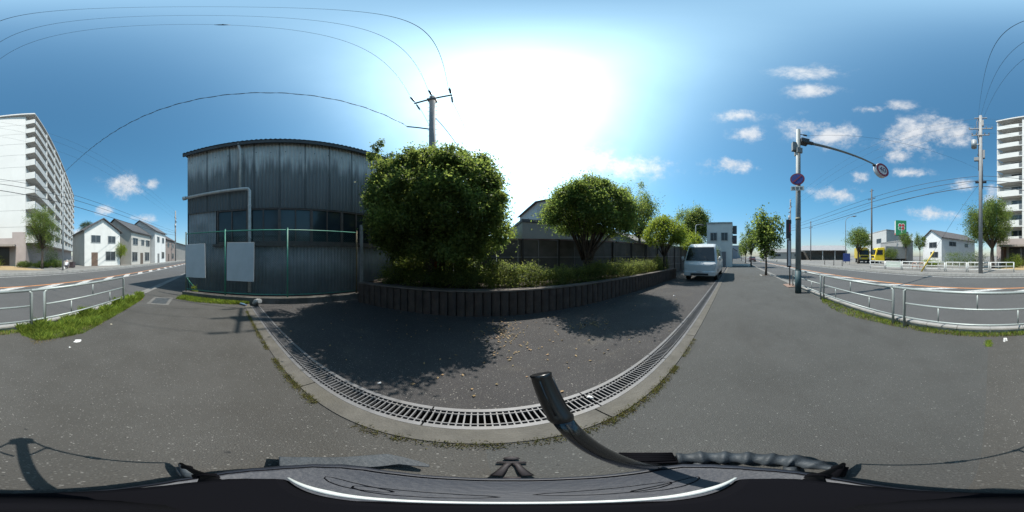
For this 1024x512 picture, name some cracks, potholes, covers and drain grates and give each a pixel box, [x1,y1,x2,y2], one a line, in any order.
drain grate [648,328,689,359]
drain grate [677,312,701,330]
drain grate [275,339,330,378]
drain grate [310,371,433,426]
drain grate [580,355,666,406]
manhole cover [146,297,173,305]
drain grate [422,393,601,430]
drain grate [691,301,707,313]
drain grate [259,318,289,341]
